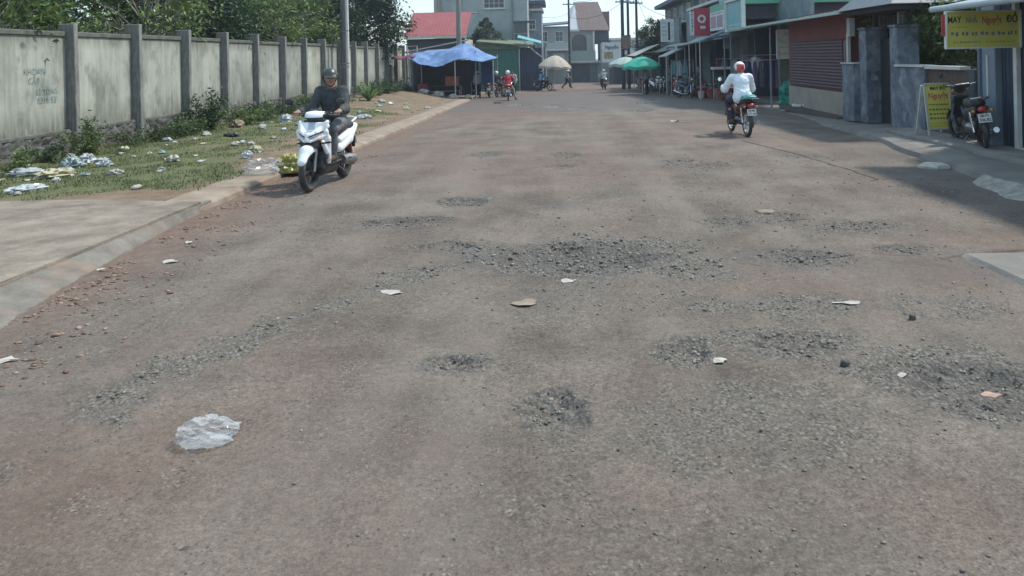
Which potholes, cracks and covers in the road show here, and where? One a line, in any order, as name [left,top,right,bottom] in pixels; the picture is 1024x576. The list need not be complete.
pothole [798,219,916,234]
pothole [641,331,726,379]
pothole [501,380,606,437]
pothole [745,210,816,225]
pothole [380,238,497,254]
pothole [425,196,501,208]
pothole [742,248,869,269]
pothole [692,216,759,228]
pothole [347,214,470,229]
pothole [416,353,518,379]
pothole [721,329,864,359]
pothole [881,356,1024,428]
